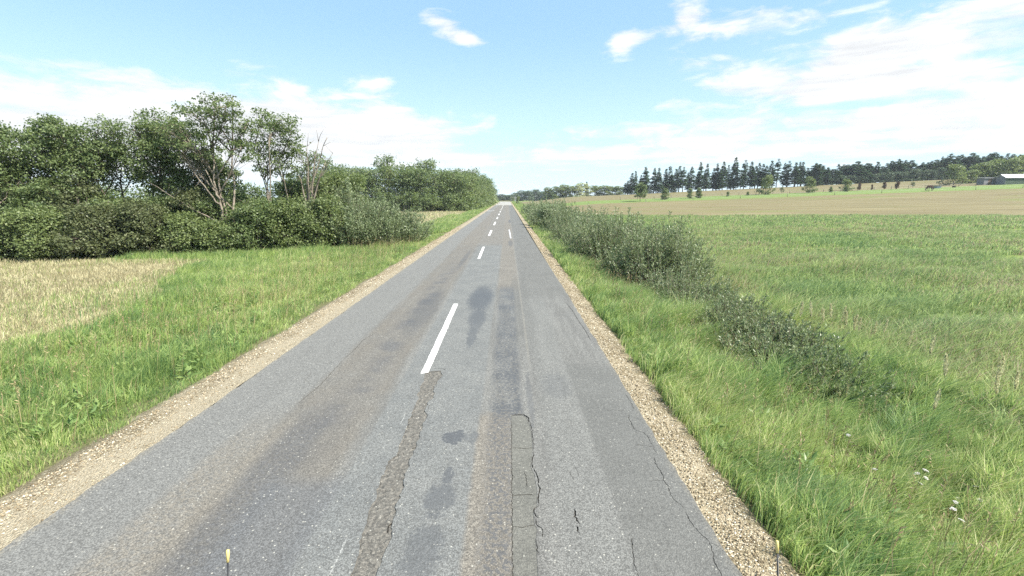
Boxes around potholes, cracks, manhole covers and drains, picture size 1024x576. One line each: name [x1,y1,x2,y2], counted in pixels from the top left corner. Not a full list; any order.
crack [511,414,543,576]
crack [621,394,722,576]
